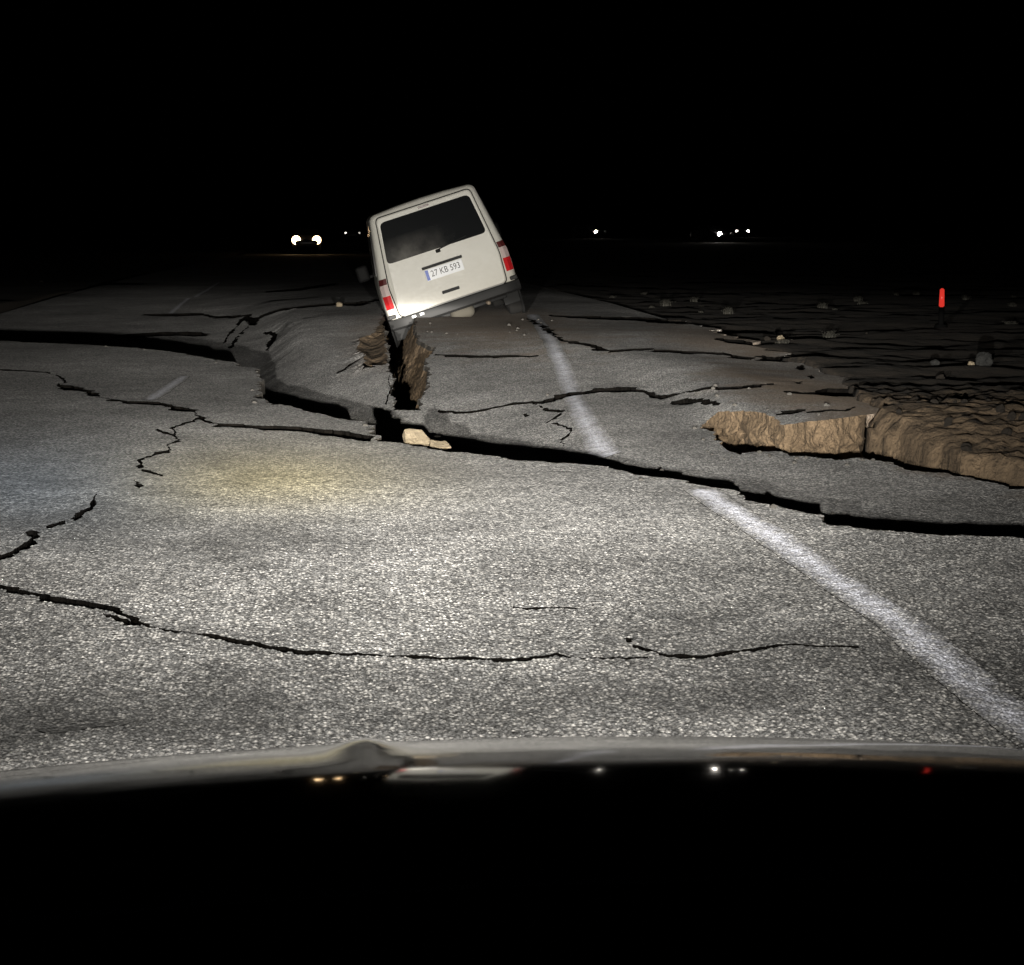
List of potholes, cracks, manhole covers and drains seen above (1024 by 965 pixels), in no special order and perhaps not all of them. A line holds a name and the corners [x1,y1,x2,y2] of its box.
crack [0,283,1019,732]
